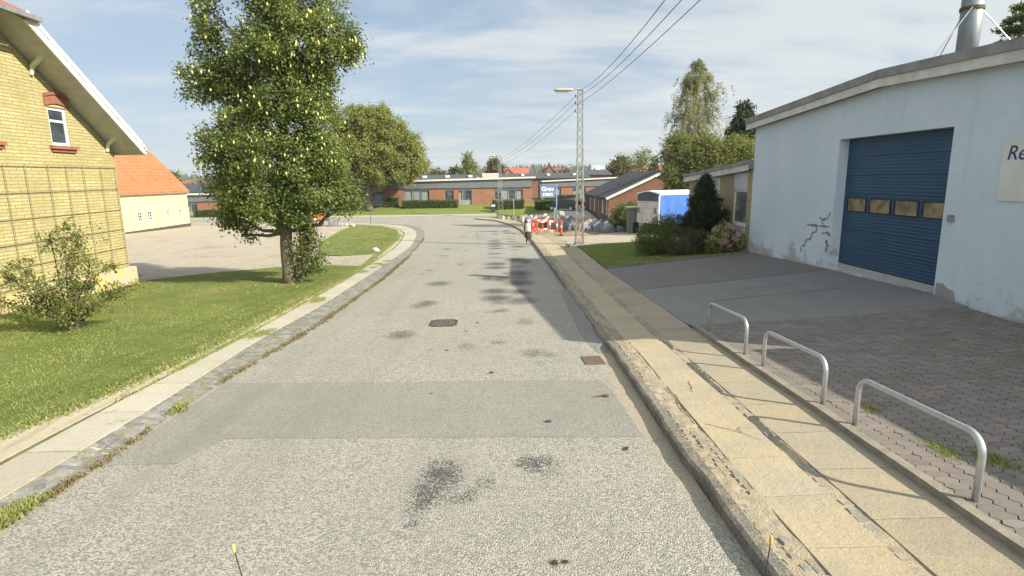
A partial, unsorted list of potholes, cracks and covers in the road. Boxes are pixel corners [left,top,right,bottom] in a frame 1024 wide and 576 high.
manhole cover [428,319,458,327]
